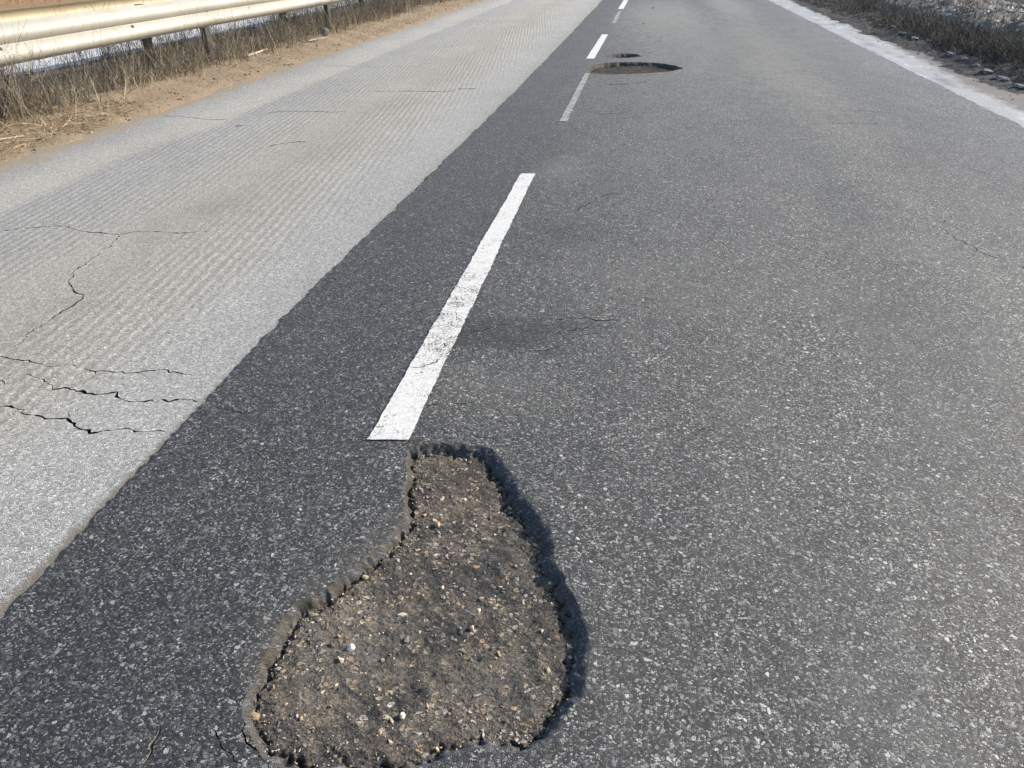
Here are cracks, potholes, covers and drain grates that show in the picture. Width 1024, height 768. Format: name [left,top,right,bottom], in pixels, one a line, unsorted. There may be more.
crack [0,225,255,434]
pothole [587,62,683,74]
